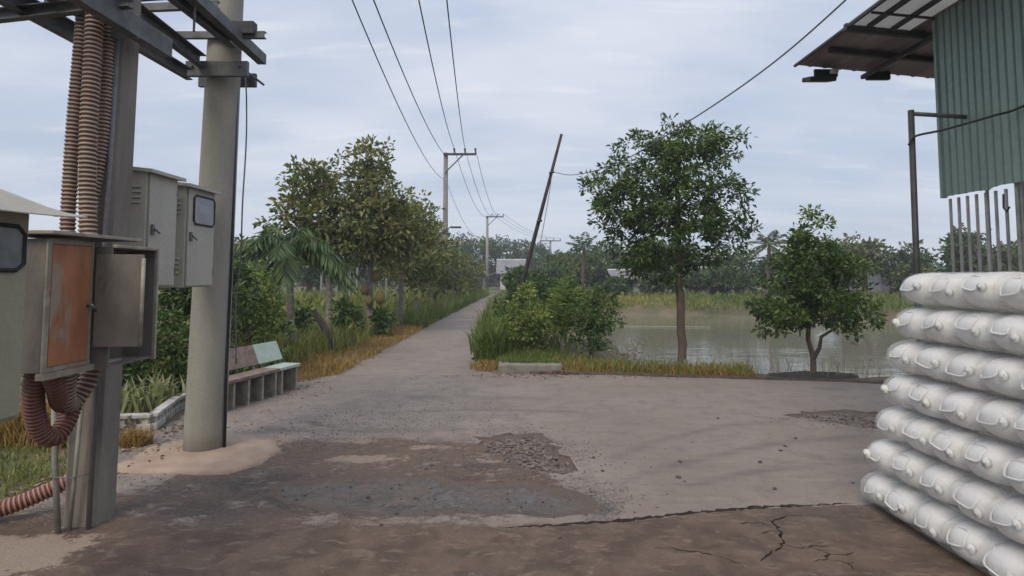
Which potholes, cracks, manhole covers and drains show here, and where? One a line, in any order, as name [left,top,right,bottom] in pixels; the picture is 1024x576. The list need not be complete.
pothole [784,409,883,429]
crack [505,503,855,569]
pothole [473,432,579,475]
